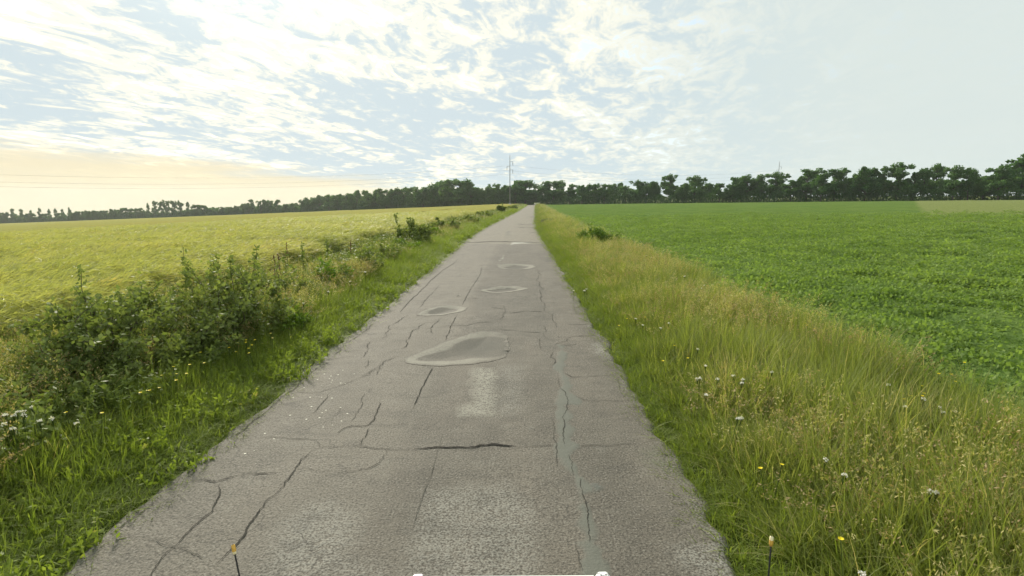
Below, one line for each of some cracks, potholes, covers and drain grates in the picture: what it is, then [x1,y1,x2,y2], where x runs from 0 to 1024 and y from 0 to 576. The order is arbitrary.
pothole [404,330,510,366]
crack [112,273,629,574]
pothole [416,305,468,316]
